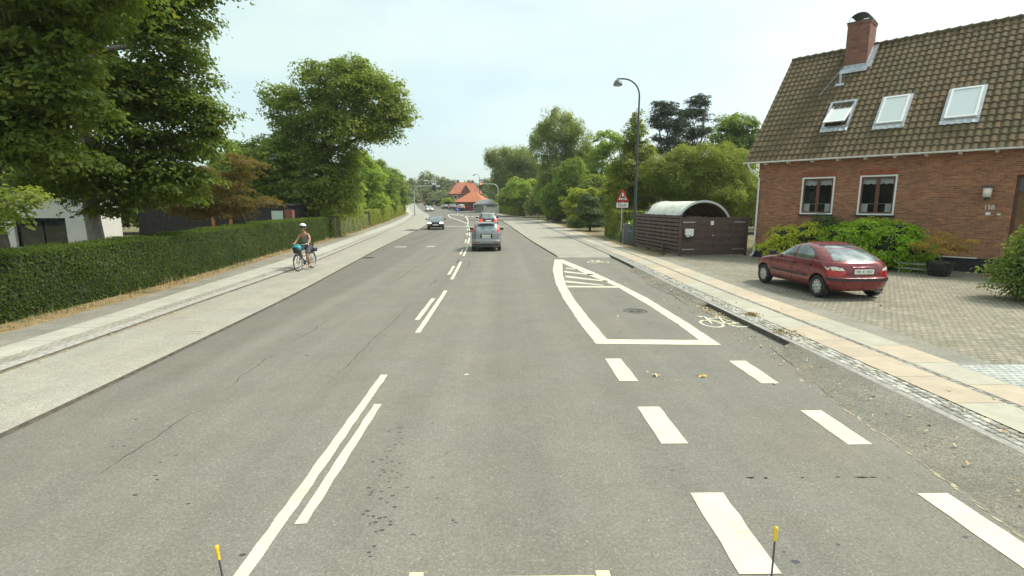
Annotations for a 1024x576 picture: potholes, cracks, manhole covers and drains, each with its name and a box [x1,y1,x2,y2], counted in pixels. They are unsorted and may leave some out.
crack [88,410,202,481]
